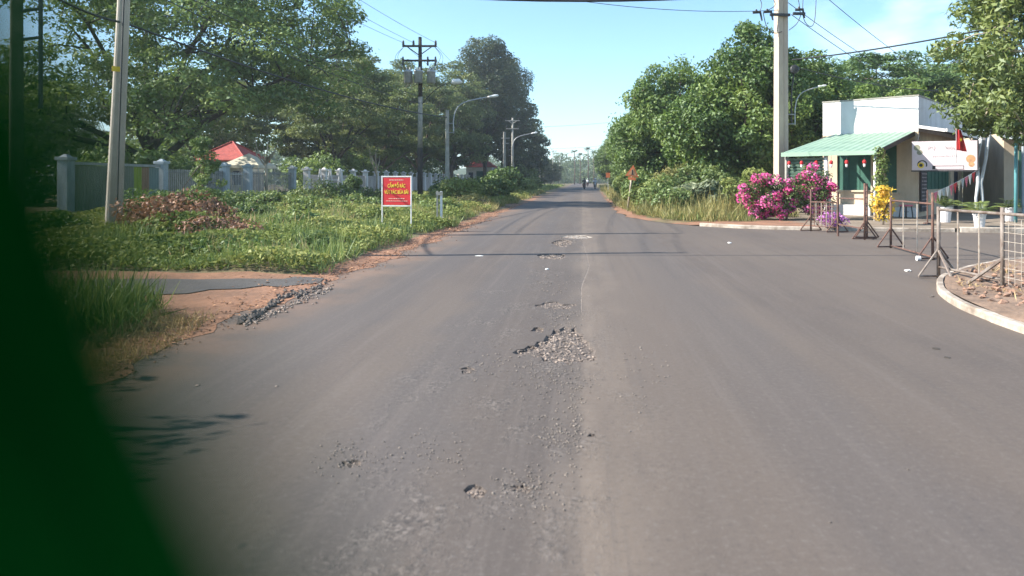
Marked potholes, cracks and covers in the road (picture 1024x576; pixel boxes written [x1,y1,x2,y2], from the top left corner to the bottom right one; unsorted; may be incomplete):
pothole [463,484,487,499]
crack [580,241,589,315]
pothole [512,327,597,365]
pothole [510,484,531,493]
